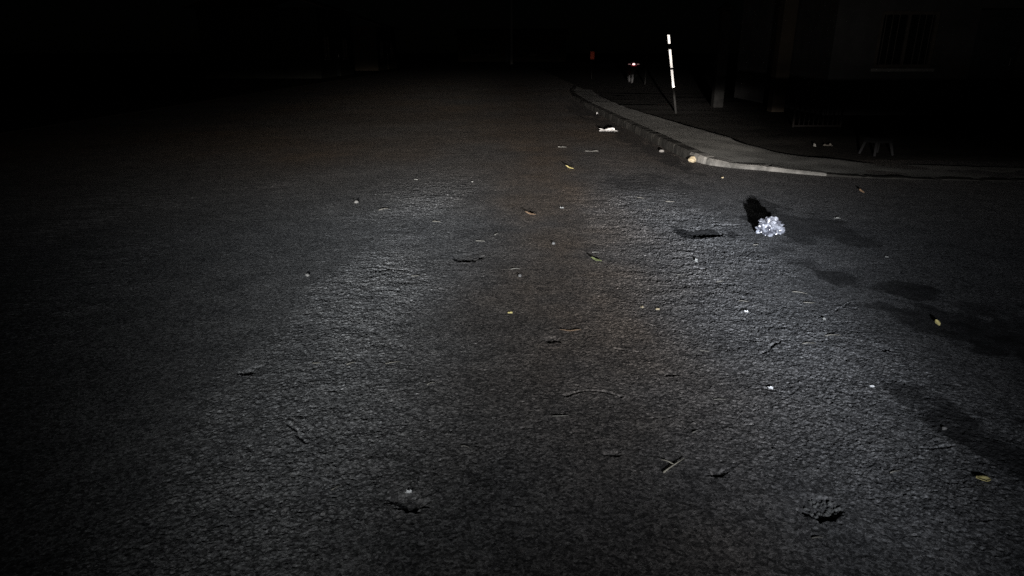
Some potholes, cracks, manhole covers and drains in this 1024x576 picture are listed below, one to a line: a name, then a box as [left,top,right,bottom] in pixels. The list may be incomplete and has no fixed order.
crack [758,338,793,355]
pothole [439,247,494,264]
pothole [780,486,852,525]
pothole [677,228,735,238]
crack [284,420,310,445]
pothole [540,334,563,344]
pothole [379,490,441,515]
